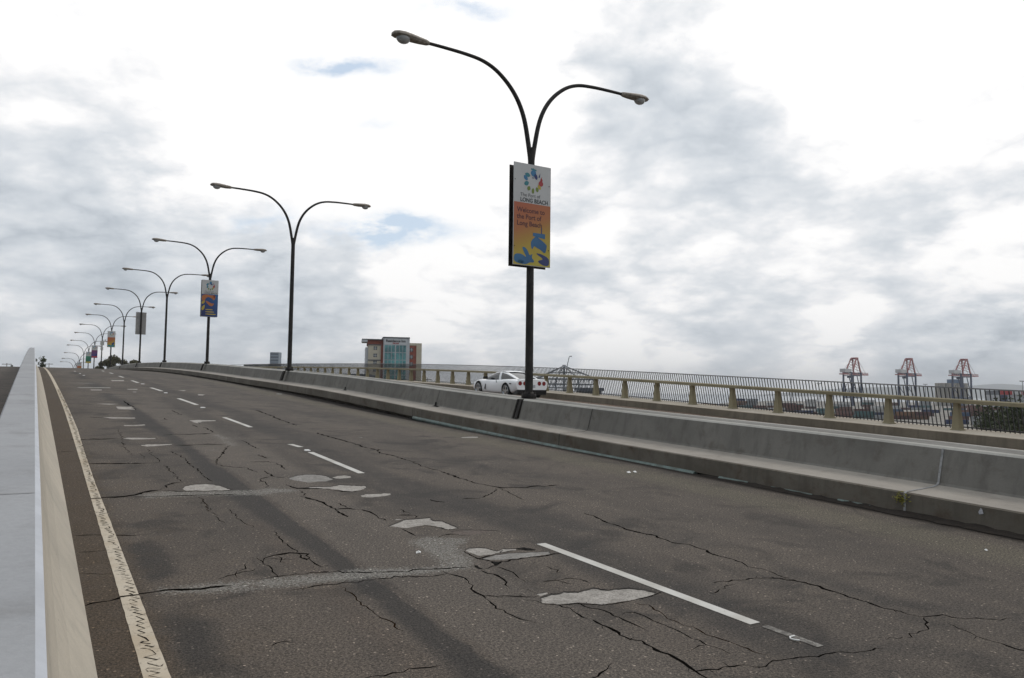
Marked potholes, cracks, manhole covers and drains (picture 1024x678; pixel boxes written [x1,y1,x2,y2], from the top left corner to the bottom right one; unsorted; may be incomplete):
crack [57,390,1024,678]
